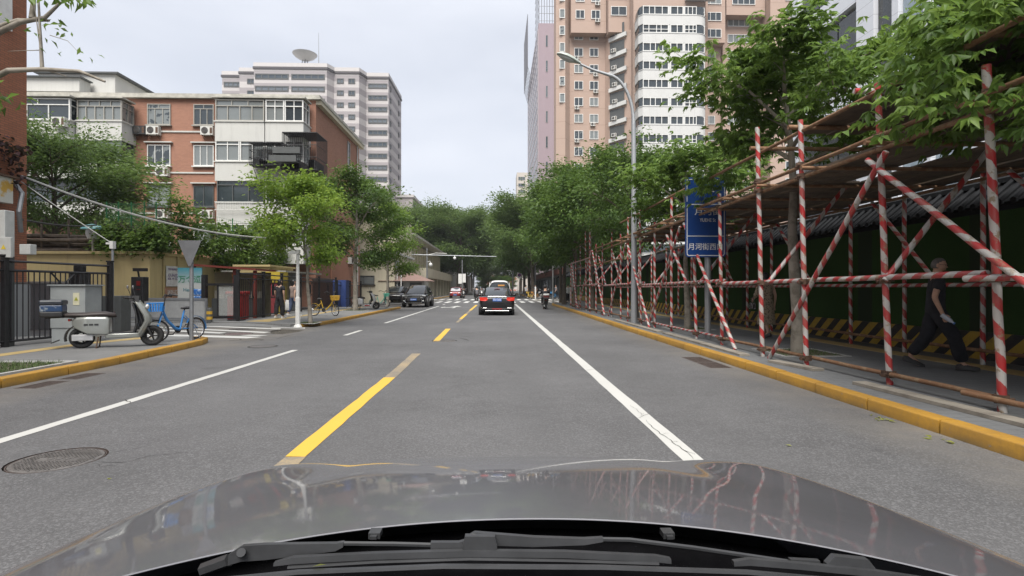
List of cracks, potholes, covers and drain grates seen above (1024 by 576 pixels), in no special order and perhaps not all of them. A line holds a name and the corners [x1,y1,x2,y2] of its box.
manhole cover [1,447,109,474]
